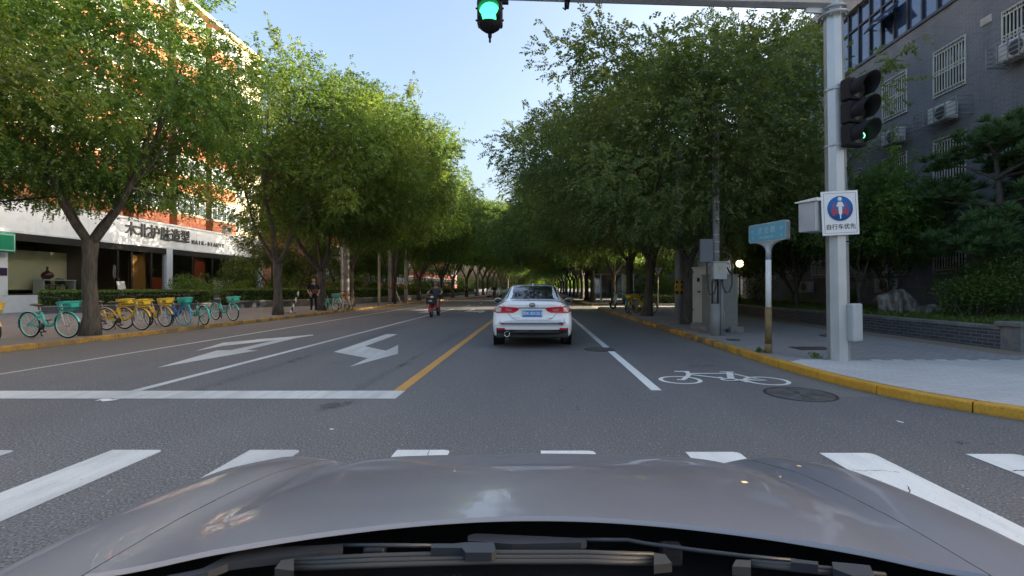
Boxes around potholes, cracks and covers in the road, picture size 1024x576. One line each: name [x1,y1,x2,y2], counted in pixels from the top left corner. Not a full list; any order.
manhole cover [763,387,839,402]
